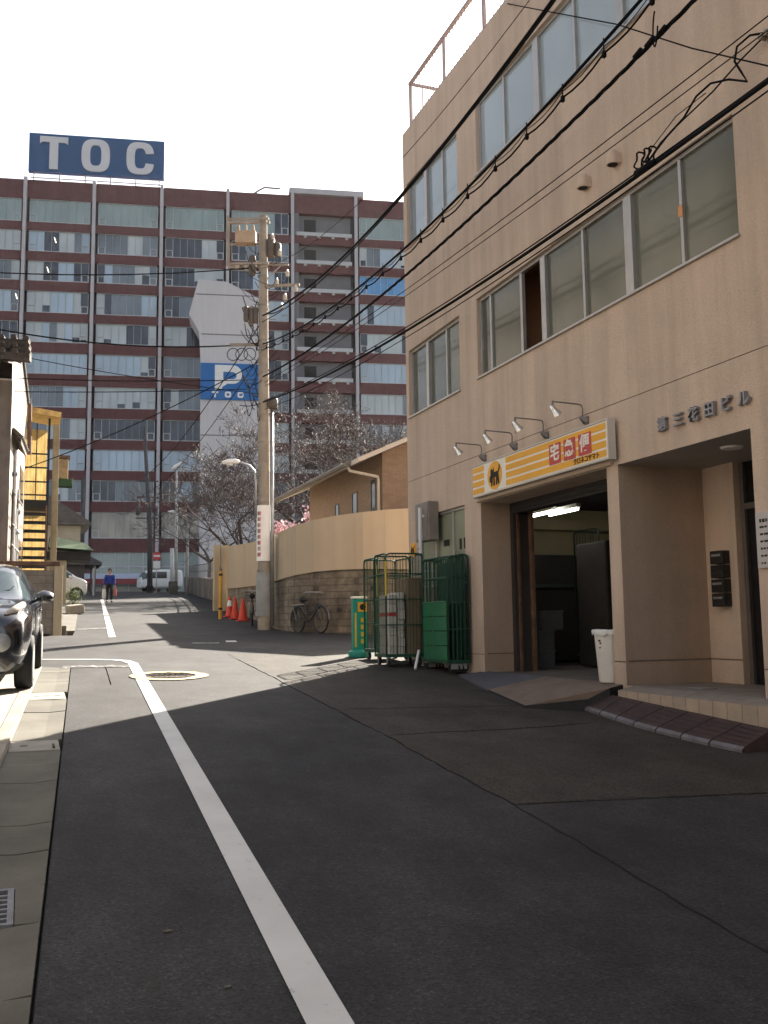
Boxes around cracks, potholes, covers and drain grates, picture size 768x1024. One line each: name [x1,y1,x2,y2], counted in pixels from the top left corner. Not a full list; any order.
drain grate [0,888,14,929]
